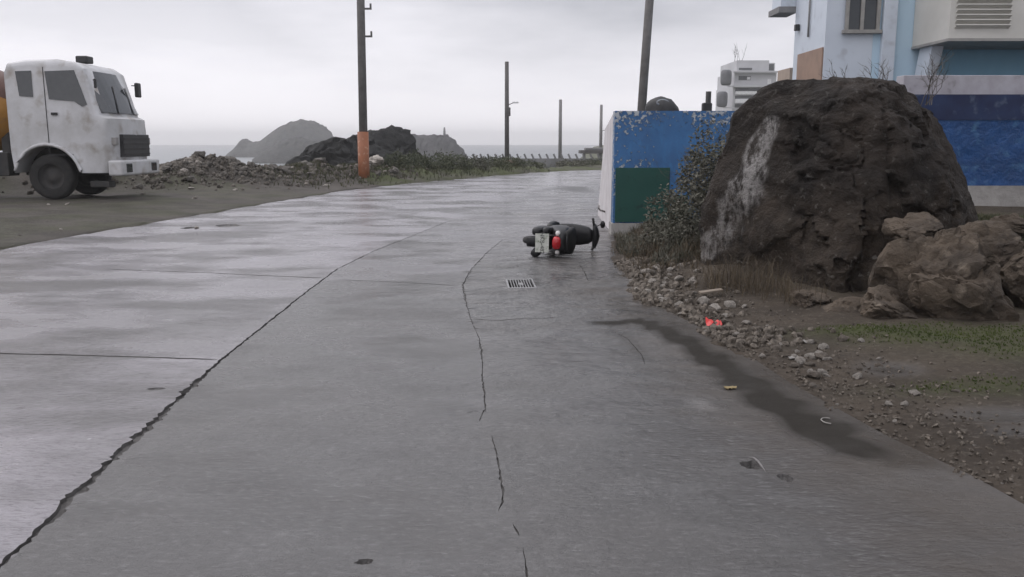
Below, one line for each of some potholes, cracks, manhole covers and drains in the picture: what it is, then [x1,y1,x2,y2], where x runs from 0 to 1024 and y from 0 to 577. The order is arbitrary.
pothole [739,457,766,472]
drain grate [505,278,536,288]
crack [0,222,562,577]
